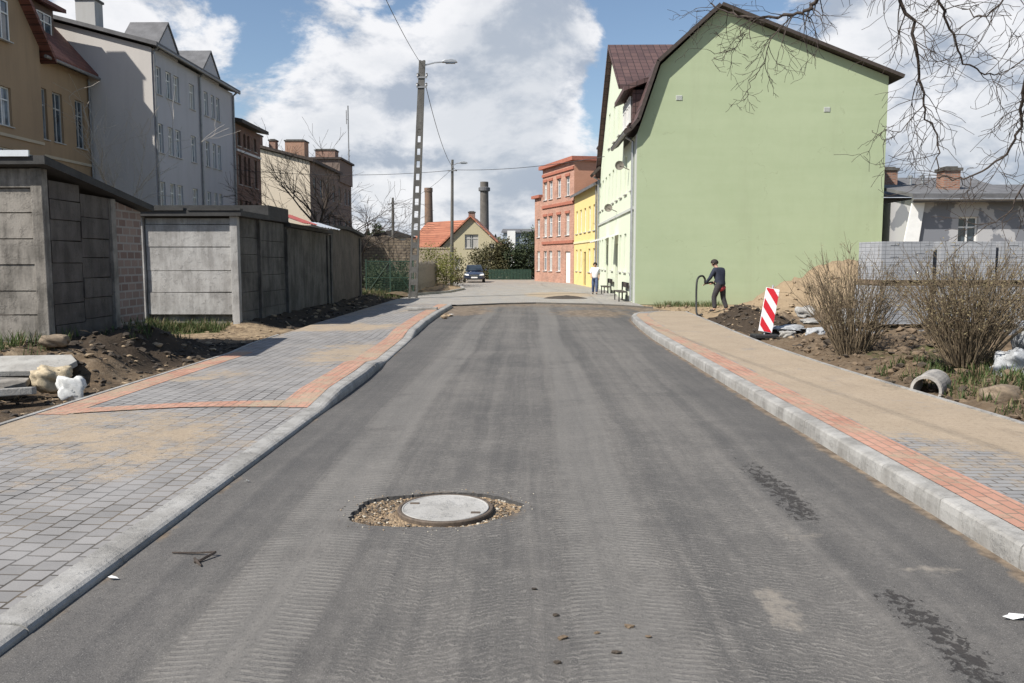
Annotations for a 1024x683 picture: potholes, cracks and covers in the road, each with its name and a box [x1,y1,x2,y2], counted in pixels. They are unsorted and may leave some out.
manhole cover [397,494,493,527]
pothole [340,485,534,535]
